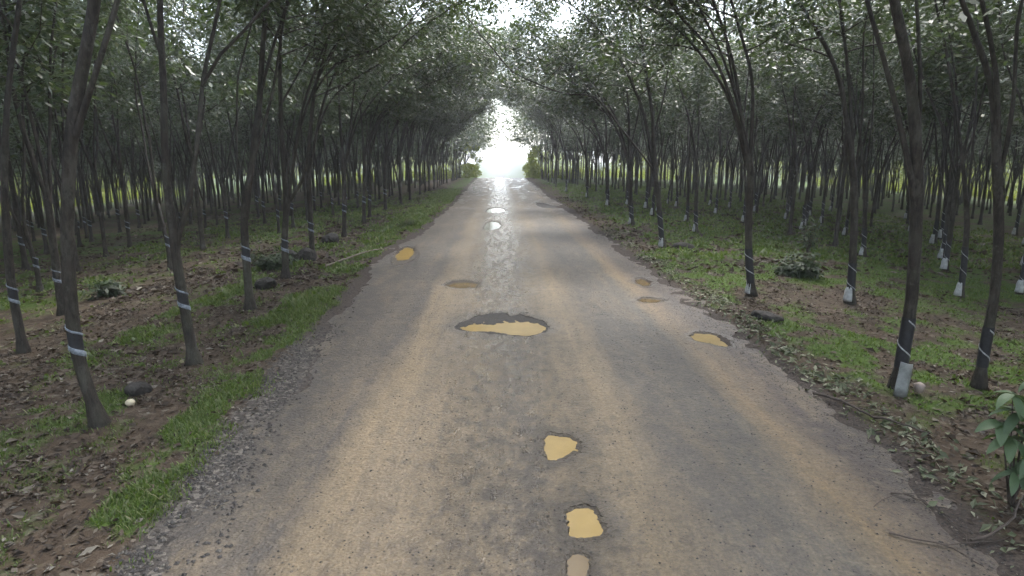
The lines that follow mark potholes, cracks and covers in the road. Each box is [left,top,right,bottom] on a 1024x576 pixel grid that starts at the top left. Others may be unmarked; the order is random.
pothole [392,246,417,266]
pothole [563,503,610,542]
pothole [541,431,583,461]
pothole [564,550,593,576]
pothole [455,312,550,337]
pothole [483,221,502,231]
pothole [444,280,480,288]
pothole [689,331,732,347]
